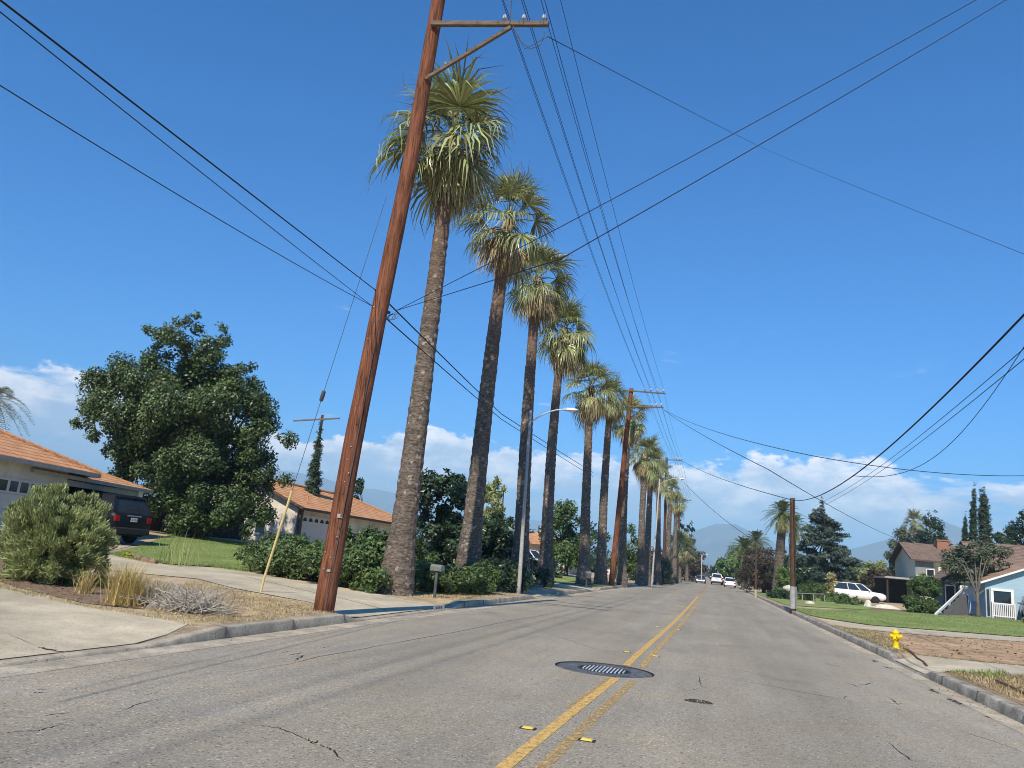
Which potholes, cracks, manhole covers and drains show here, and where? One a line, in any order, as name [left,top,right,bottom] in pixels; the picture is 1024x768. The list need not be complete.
crack [683,660,902,710]
crack [250,724,344,762]
manhole cover [555,661,654,678]
